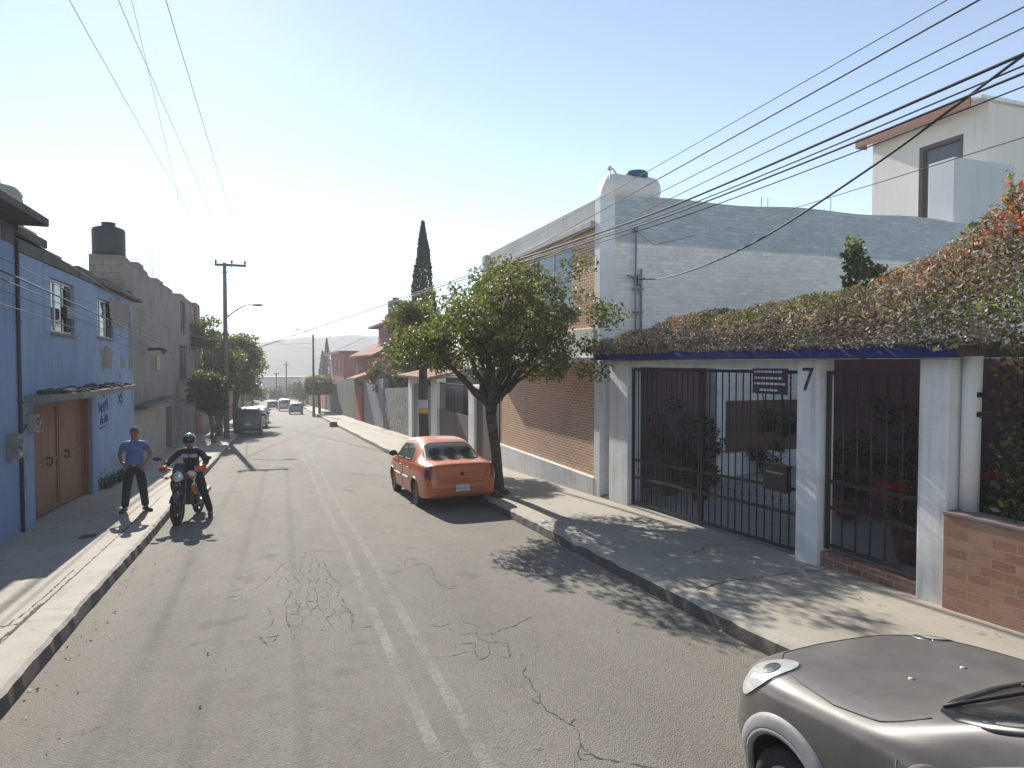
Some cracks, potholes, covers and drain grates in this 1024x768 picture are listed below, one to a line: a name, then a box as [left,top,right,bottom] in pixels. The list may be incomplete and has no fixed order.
crack [432,615,653,768]
crack [252,552,370,644]
